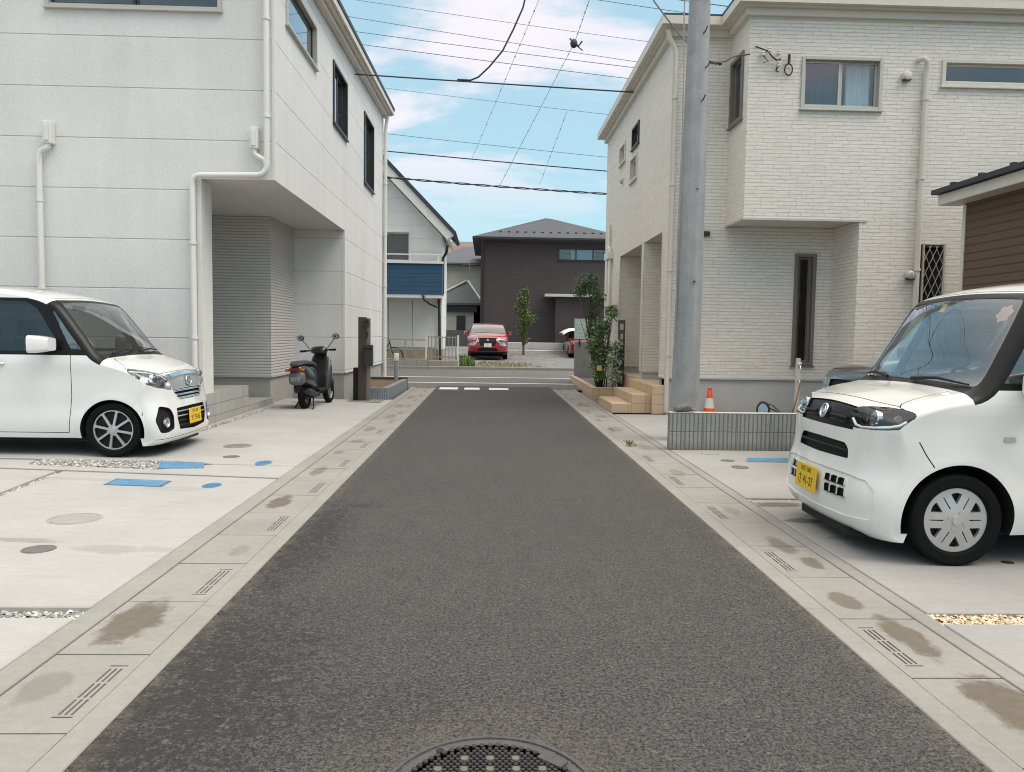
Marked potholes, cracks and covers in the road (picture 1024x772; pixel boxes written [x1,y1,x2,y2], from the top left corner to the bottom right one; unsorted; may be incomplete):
utility cover [20,545,57,554]
manhole cover [390,735,590,772]
utility cover [46,513,103,525]
